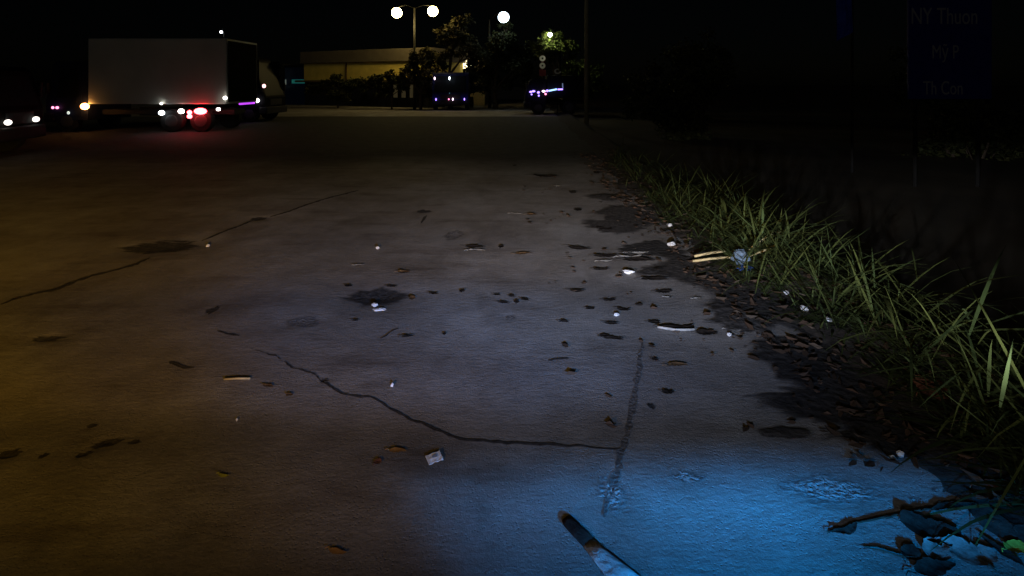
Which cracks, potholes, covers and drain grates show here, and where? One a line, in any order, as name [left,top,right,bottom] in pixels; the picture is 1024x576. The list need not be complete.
crack [256,350,621,450]
